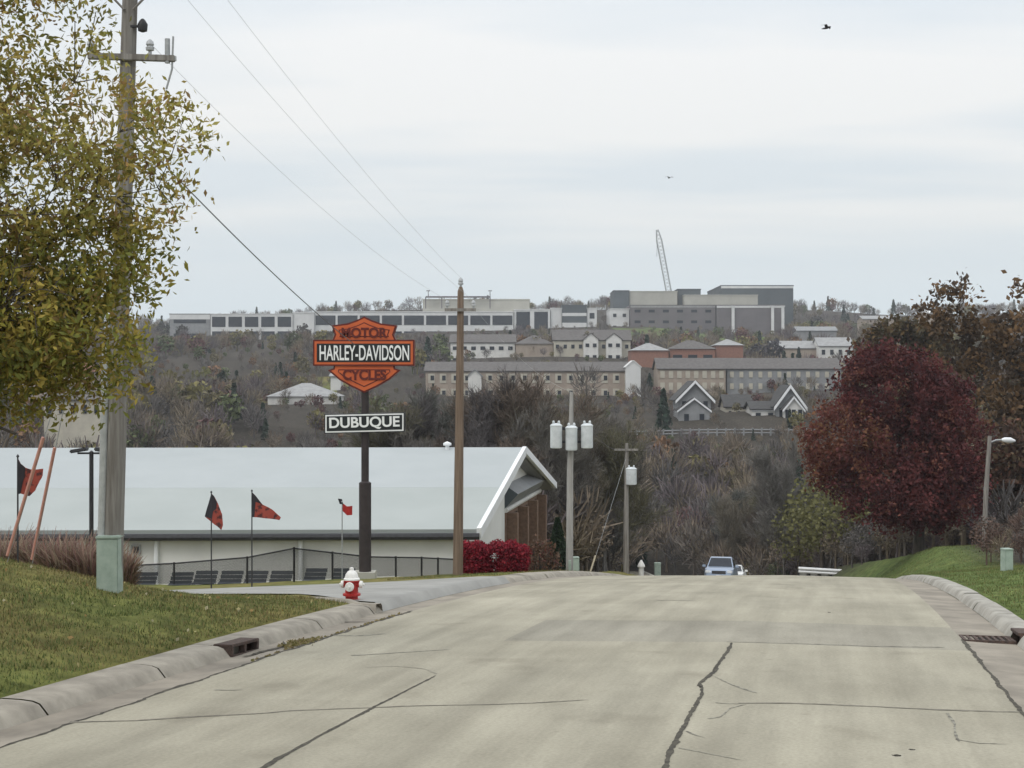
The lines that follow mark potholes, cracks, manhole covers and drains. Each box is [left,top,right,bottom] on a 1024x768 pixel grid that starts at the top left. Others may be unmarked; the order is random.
drain grate [213,637,259,657]
crack [661,643,1018,768]
drain grate [959,628,1024,645]
